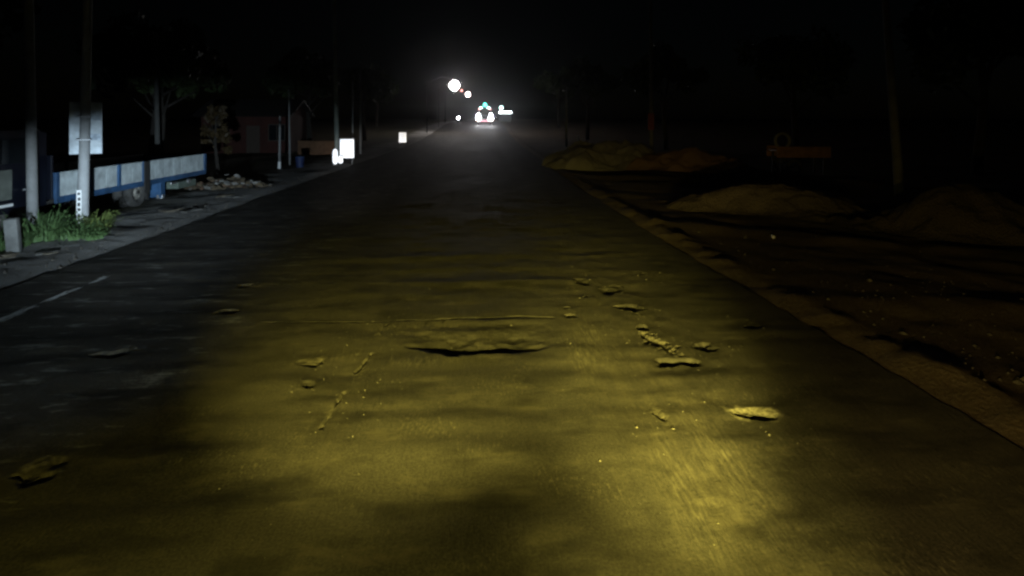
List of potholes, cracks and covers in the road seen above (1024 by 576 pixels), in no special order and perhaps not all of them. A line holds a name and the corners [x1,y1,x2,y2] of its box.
pothole [642,355,718,371]
pothole [553,306,589,320]
pothole [592,283,628,296]
pothole [388,320,564,360]
pothole [0,449,89,495]
pothole [79,344,145,362]
pothole [604,302,650,317]
pothole [708,404,794,425]
crack [255,314,561,435]
pothole [685,340,726,356]
pothole [567,277,596,288]
pothole [283,354,334,373]
